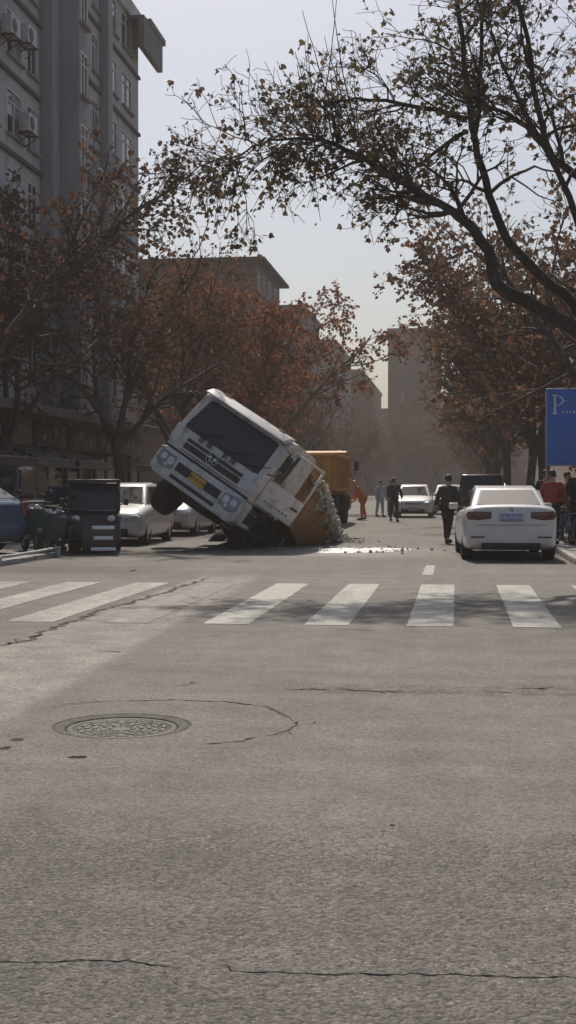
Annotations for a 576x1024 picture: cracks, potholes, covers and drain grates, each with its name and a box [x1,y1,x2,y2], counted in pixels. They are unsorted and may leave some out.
manhole cover [51,714,192,739]
crack [0,578,207,652]
crack [55,681,548,745]
crack [0,959,178,968]
crack [223,963,576,979]
